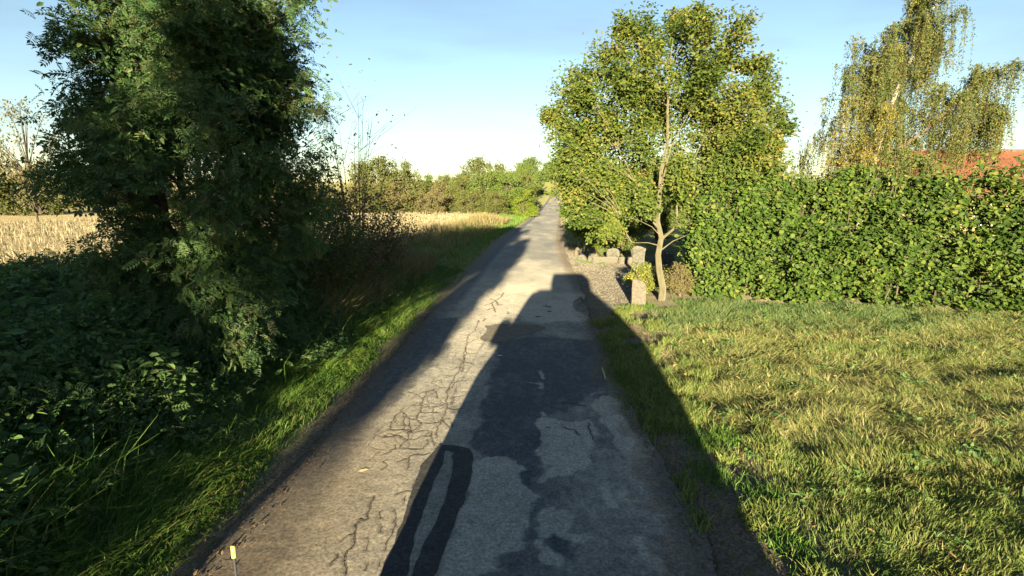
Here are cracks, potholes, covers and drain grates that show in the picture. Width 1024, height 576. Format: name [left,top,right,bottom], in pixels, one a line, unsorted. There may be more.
crack [330,293,509,576]
